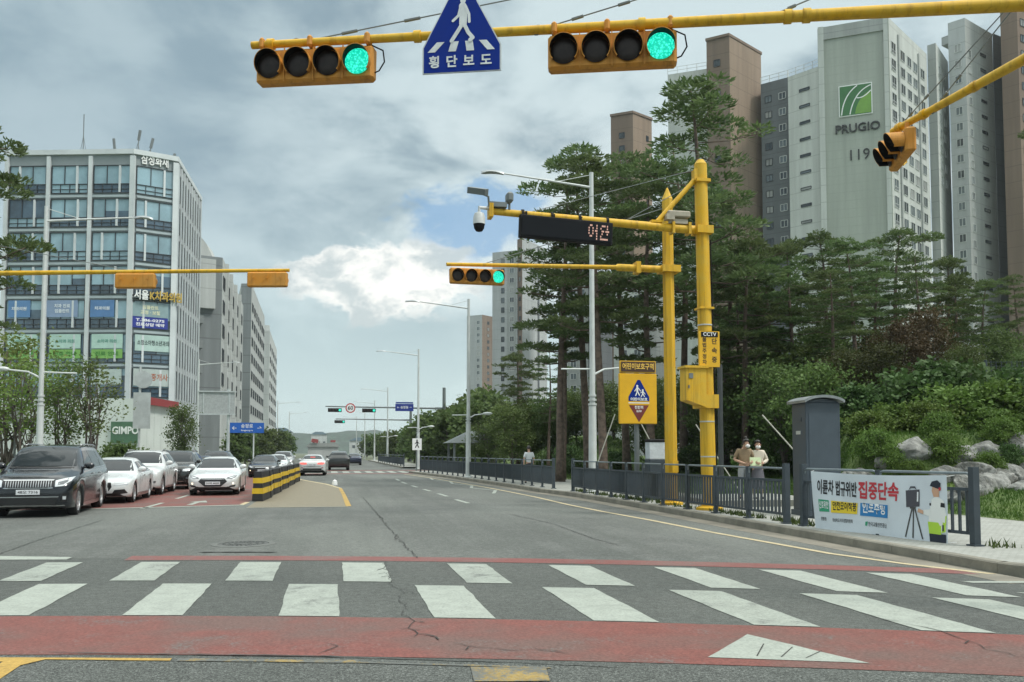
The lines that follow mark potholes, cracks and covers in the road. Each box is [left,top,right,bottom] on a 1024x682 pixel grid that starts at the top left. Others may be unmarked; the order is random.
crack [378,563,567,653]
